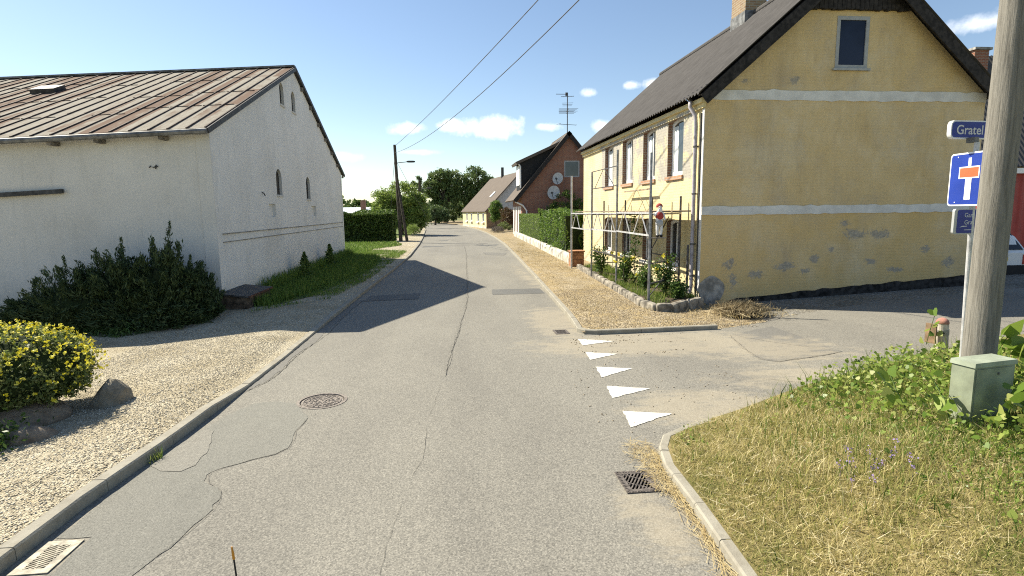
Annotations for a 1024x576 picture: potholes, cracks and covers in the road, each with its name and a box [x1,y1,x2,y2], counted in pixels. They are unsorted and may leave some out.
drain grate [6,539,85,576]
manhole cover [296,393,347,410]
drain grate [614,470,661,494]
